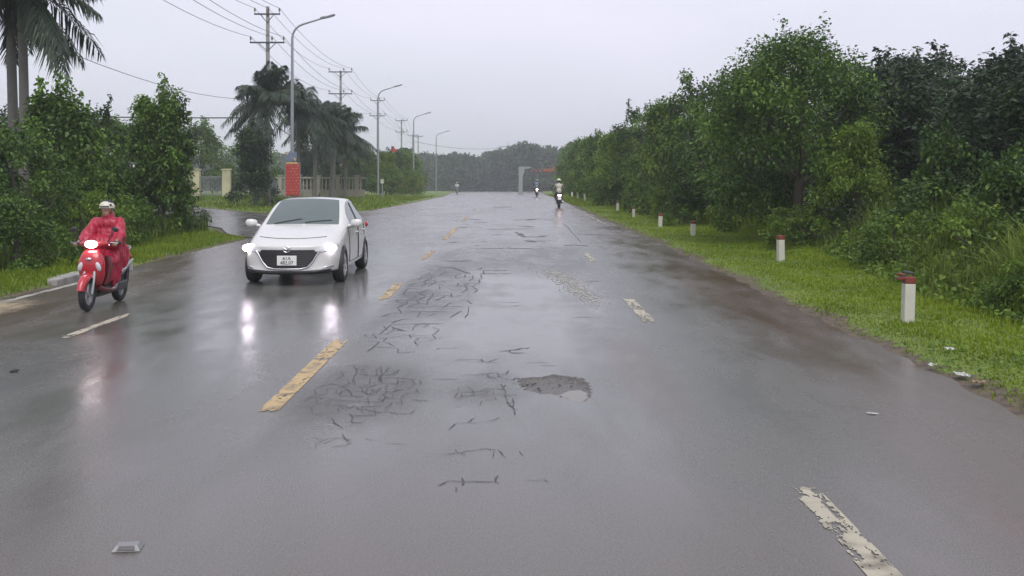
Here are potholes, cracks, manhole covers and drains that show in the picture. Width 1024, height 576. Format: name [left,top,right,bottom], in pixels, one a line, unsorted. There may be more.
crack [437,475,499,490]
crack [305,219,548,448]
crack [565,225,622,246]
pothole [516,374,593,402]
